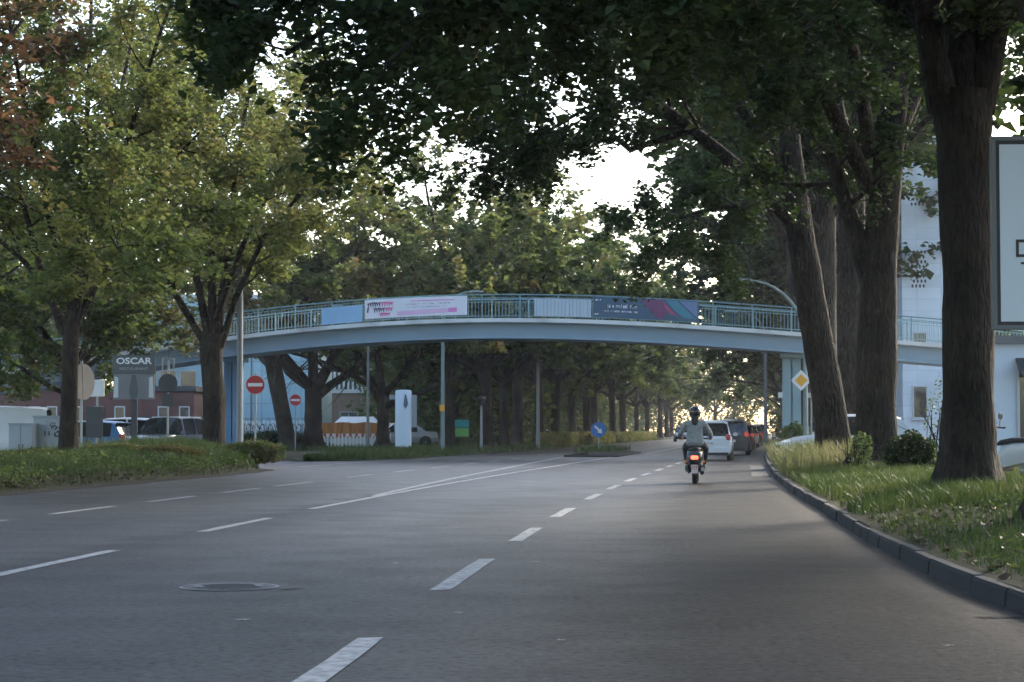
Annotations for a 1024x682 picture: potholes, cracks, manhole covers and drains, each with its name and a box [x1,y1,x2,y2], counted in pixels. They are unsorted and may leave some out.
manhole cover [179,583,279,591]
